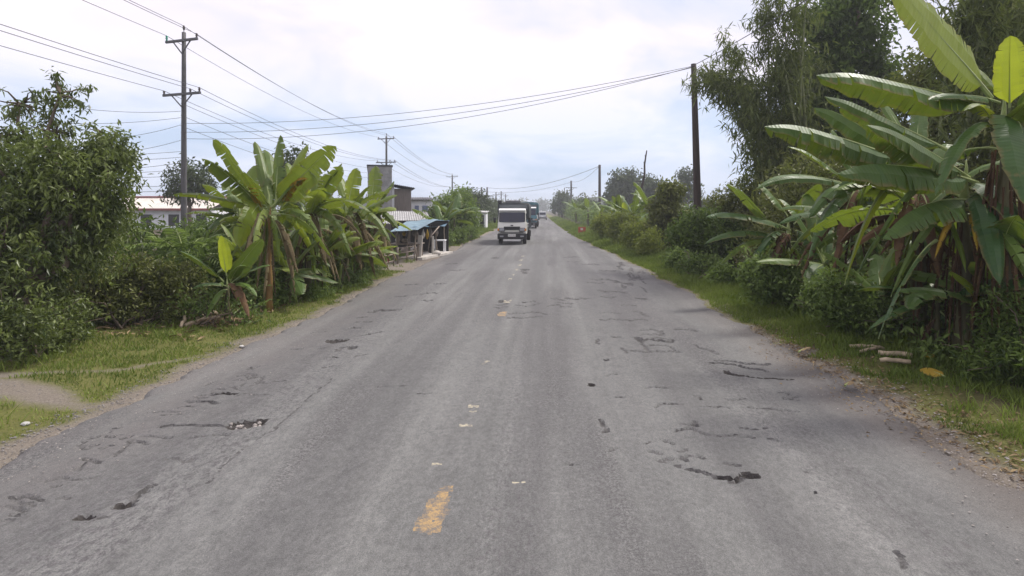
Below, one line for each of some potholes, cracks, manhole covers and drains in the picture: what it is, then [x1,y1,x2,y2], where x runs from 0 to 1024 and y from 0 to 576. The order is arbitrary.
crack [147,366,286,416]
pothole [110,483,158,510]
pothole [160,419,268,430]
pothole [684,468,761,484]
crack [0,427,230,523]
crack [496,256,800,469]
